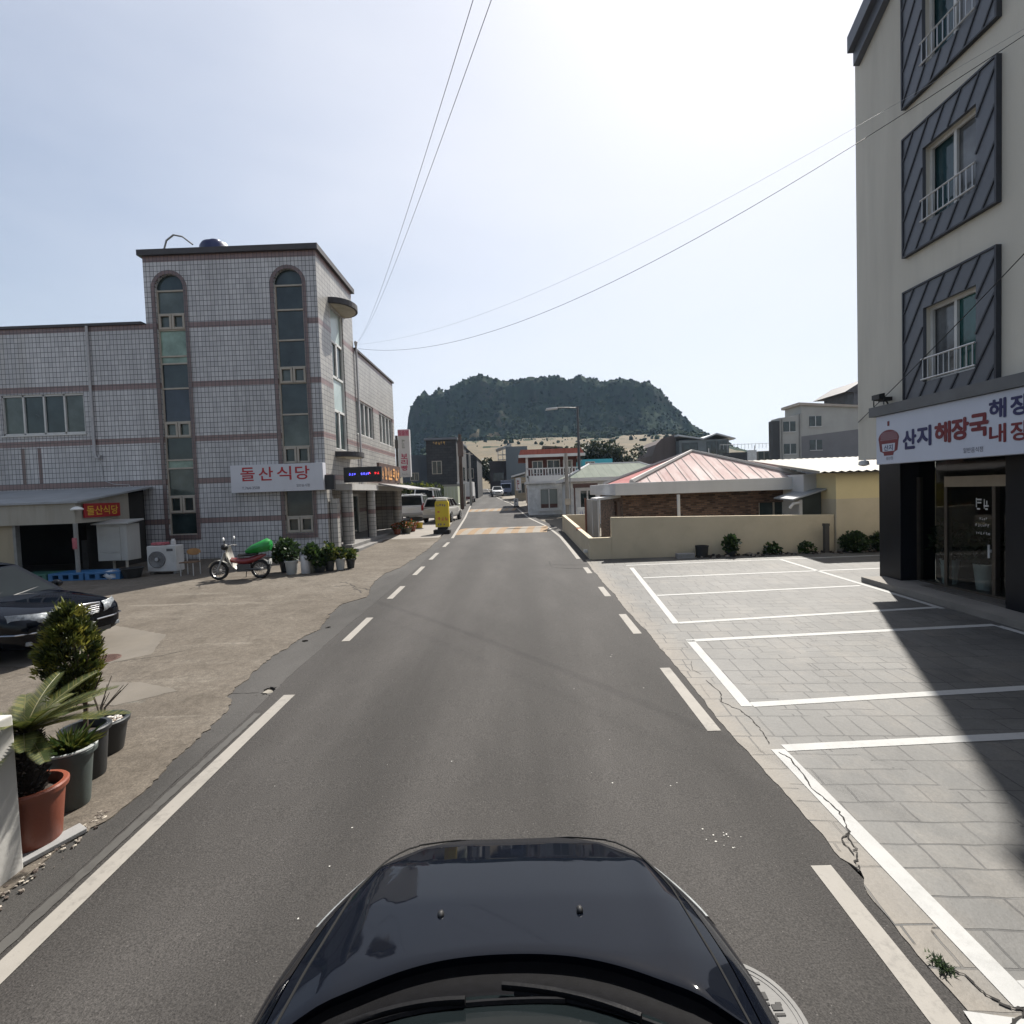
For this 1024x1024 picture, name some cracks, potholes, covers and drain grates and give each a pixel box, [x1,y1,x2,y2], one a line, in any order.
crack [948,967,1024,1024]
pothole [257,686,278,696]
crack [691,661,860,871]
